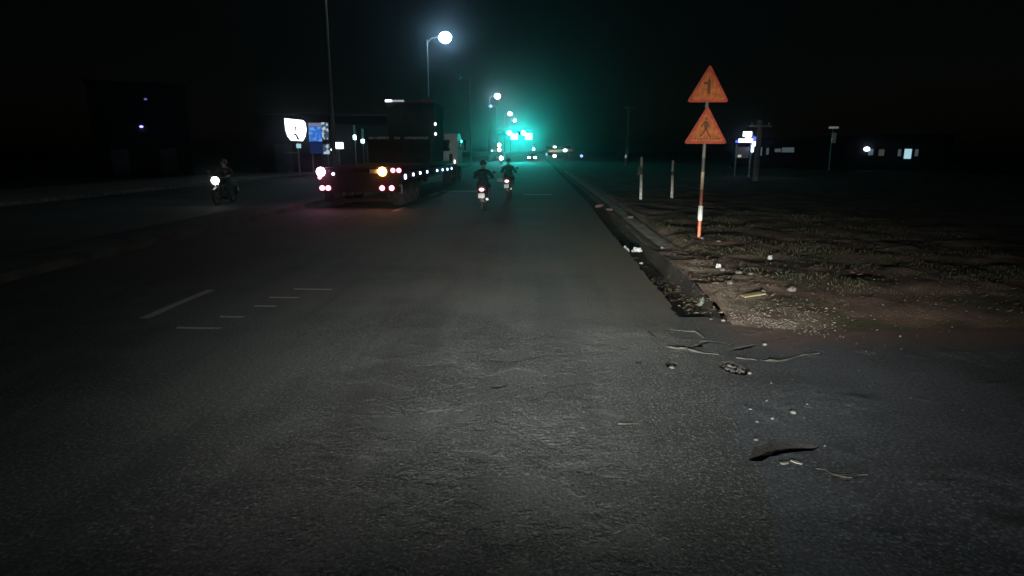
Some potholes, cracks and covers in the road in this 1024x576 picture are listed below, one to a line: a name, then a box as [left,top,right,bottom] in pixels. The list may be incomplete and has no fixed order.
pothole [717,361,751,376]
crack [642,325,822,362]
crack [812,466,872,481]
pothole [749,441,821,461]
